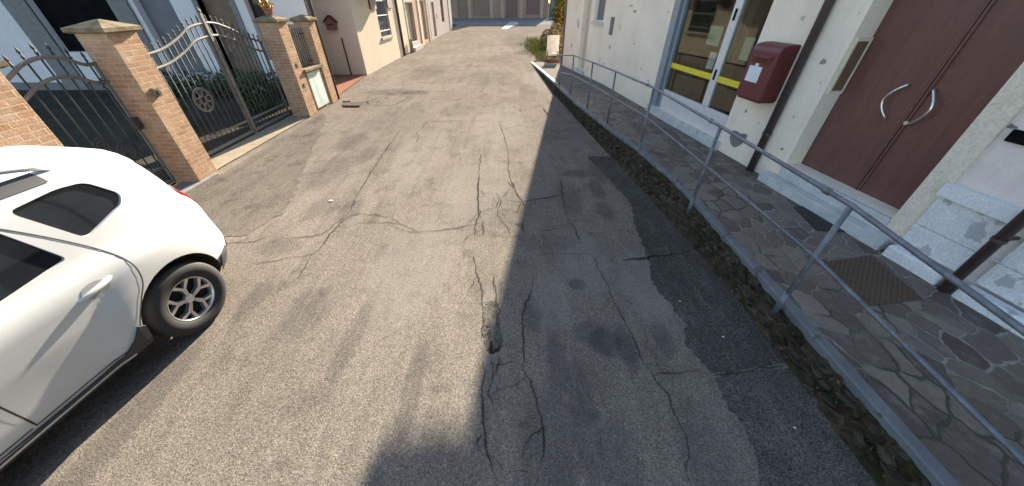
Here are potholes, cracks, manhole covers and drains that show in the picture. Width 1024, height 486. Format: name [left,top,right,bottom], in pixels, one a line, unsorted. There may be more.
pothole [481,301,504,354]
crack [231,107,701,481]
